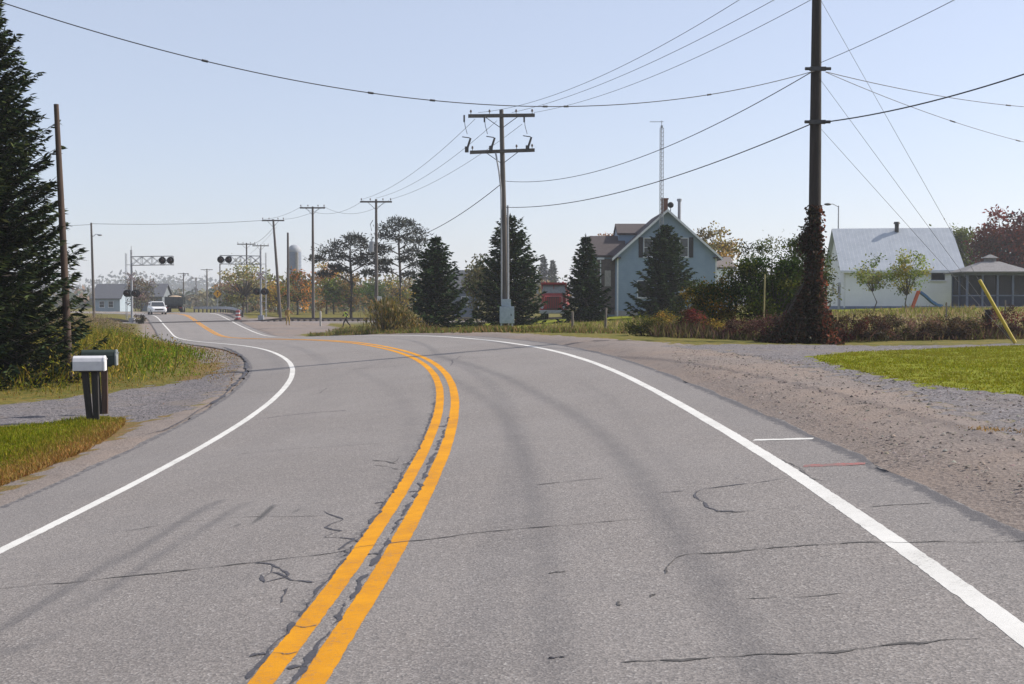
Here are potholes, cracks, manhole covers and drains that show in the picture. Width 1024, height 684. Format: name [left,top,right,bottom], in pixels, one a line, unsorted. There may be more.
crack [623,638,983,662]
crack [9,518,647,588]
crack [665,540,1024,574]
